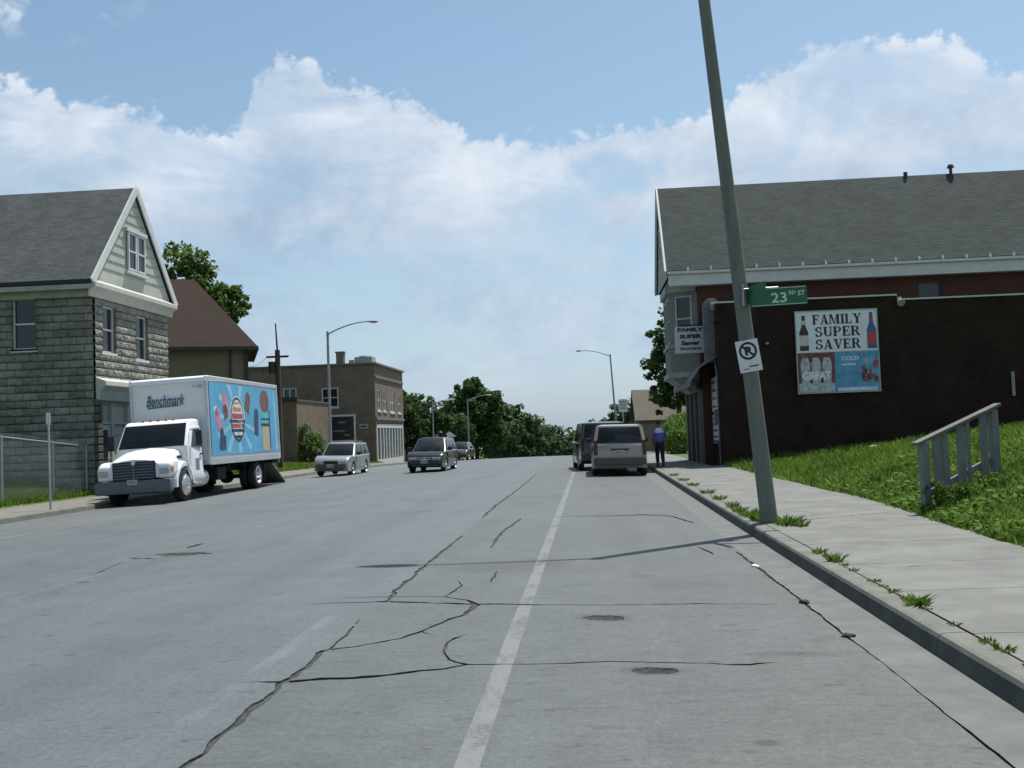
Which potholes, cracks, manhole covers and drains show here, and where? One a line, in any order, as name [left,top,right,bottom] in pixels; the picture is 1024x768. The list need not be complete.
crack [616,514,693,523]
crack [178,536,1016,768]
crack [482,473,538,549]
